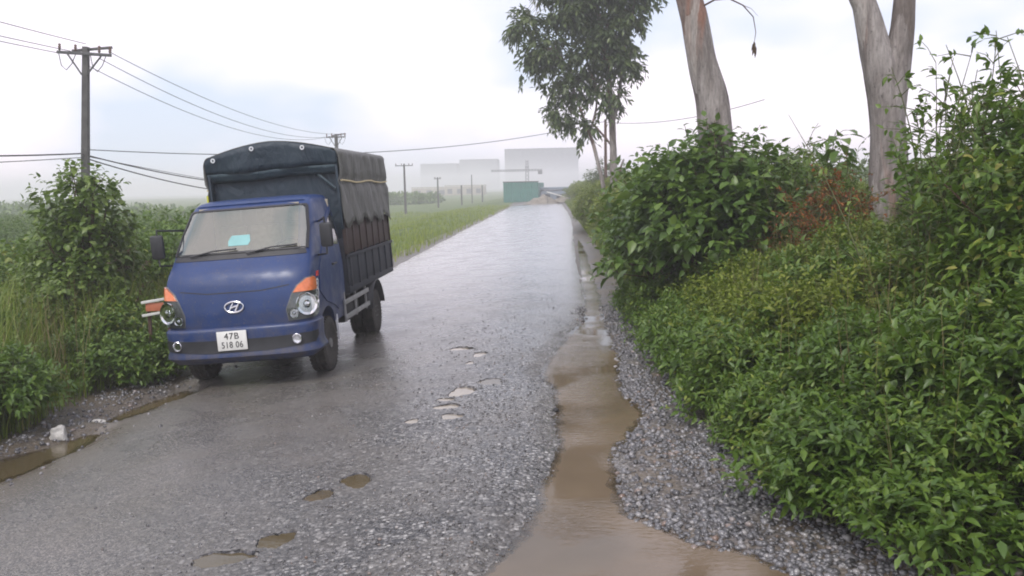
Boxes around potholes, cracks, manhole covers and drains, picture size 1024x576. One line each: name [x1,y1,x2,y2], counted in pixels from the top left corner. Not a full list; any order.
pothole [302,488,335,501]
pothole [339,472,372,489]
pothole [190,549,260,569]
pothole [255,529,297,549]
pothole [447,385,477,397]
